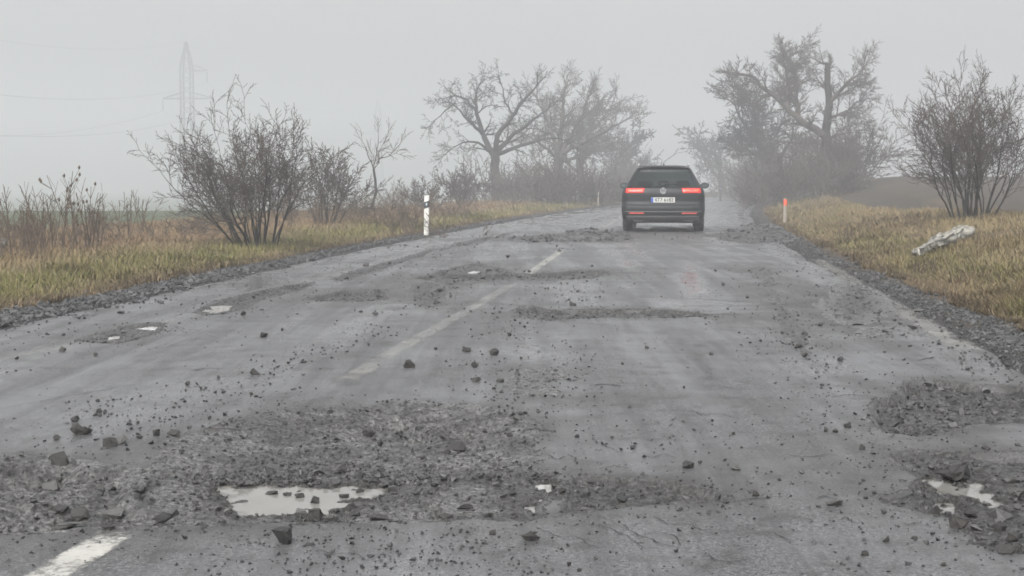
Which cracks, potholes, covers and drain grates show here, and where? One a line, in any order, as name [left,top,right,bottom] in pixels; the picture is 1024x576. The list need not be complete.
pothole [865,378,1024,436]
pothole [506,228,635,242]
pothole [0,452,158,536]
pothole [124,400,570,528]
pothole [192,282,316,316]
crack [543,516,791,549]
pothole [306,289,391,301]
pothole [875,449,1024,554]
pothole [415,262,613,284]
pothole [509,305,714,321]
pothole [73,322,166,343]
